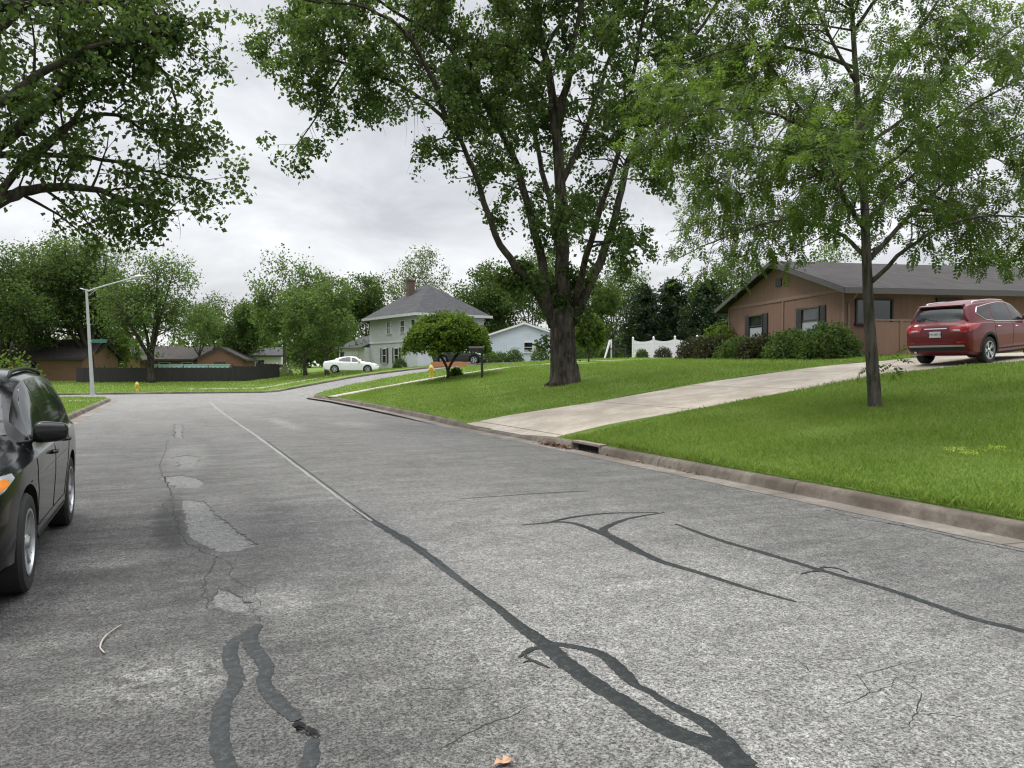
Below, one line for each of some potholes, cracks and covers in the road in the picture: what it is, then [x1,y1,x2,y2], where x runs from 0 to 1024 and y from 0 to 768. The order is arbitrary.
crack [772,653,983,731]
crack [120,439,261,622]
drain grate [571,440,607,454]
crack [411,681,526,750]
